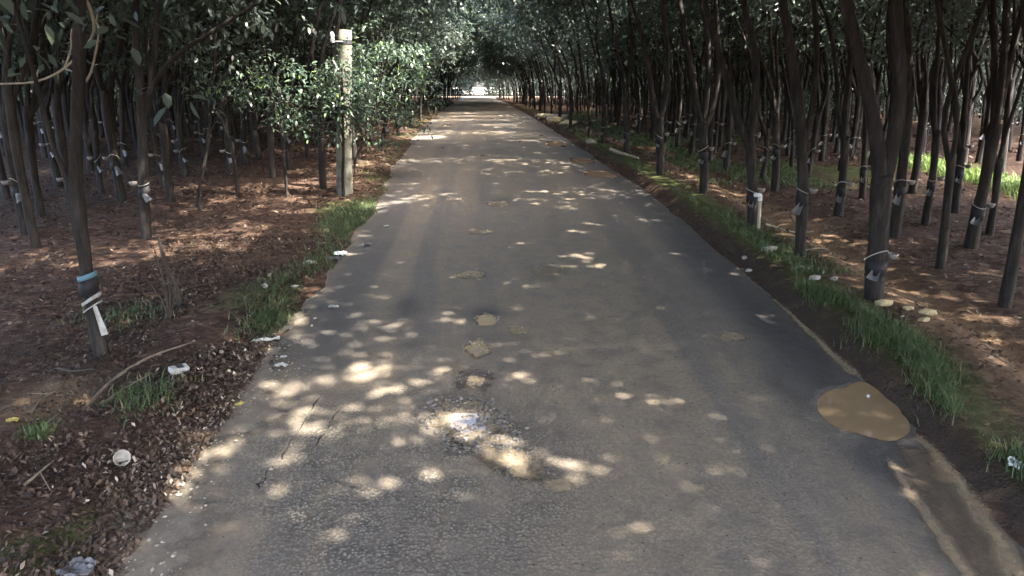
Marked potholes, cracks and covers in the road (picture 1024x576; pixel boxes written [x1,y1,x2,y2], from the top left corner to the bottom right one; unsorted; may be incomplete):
pothole [454,269,485,280]
pothole [418,394,529,457]
pothole [817,381,910,441]
crack [251,396,341,497]
pothole [451,367,496,395]
pothole [582,170,618,178]
pothole [463,338,492,359]
pothole [510,326,526,335]
pothole [474,314,500,327]
